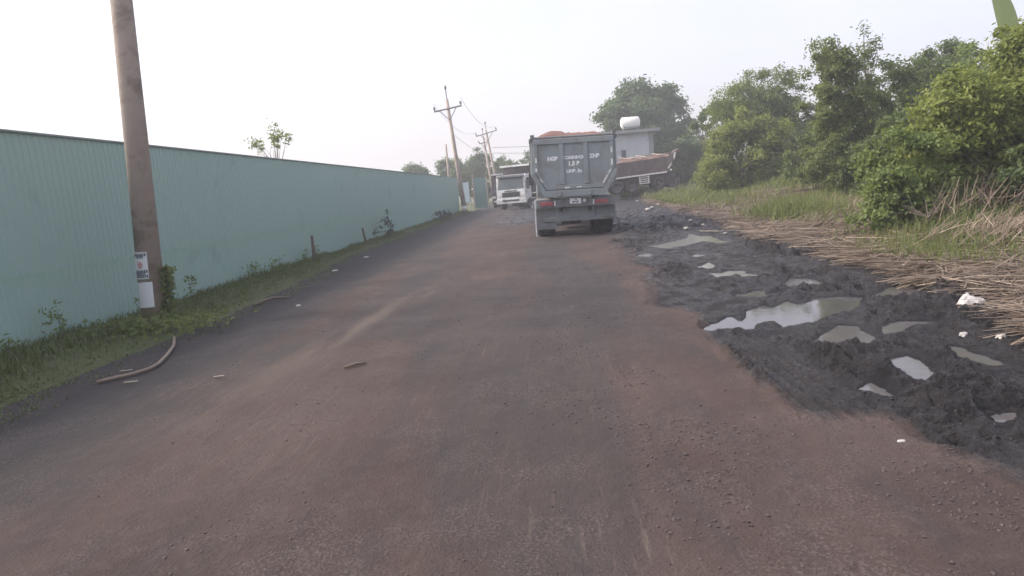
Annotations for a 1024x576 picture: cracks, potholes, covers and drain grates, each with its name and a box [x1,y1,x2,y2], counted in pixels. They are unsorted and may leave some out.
pothole [644,232,732,248]
pothole [932,339,1021,367]
pothole [846,370,905,399]
pothole [702,268,762,277]
pothole [805,320,888,343]
pothole [871,311,946,334]
pothole [874,347,954,380]
pothole [695,291,870,331]
pothole [778,272,828,287]
